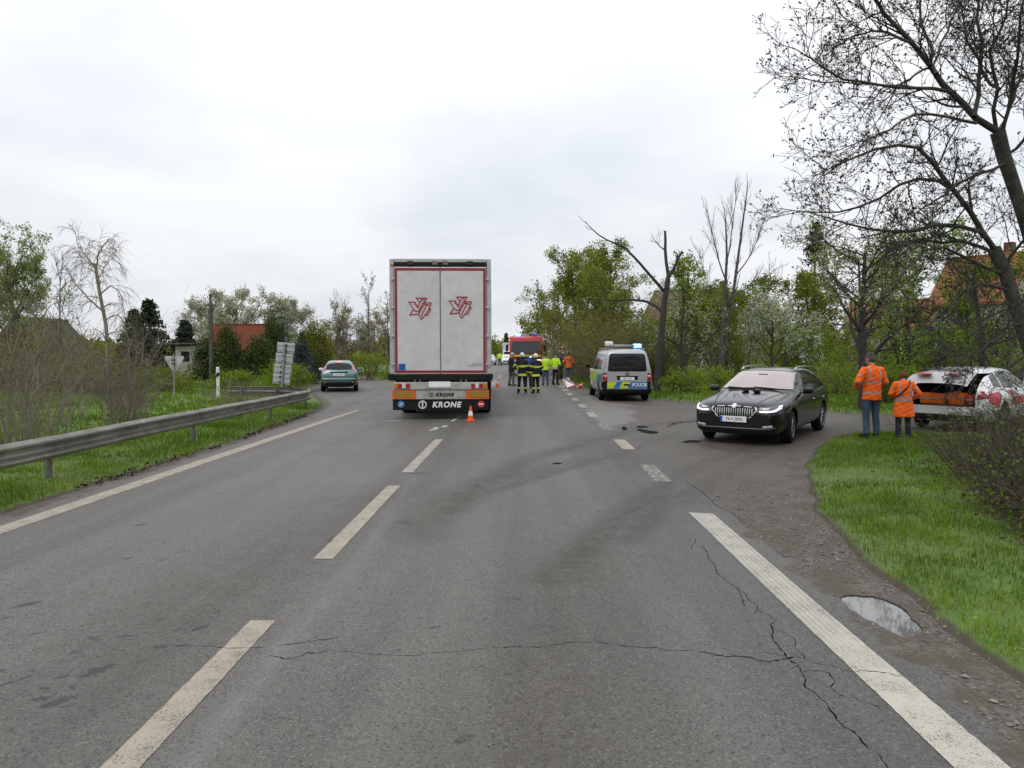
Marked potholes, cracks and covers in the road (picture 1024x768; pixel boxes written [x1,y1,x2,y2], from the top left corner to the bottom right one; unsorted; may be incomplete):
pothole [841,595,922,637]
crack [267,538,888,768]
